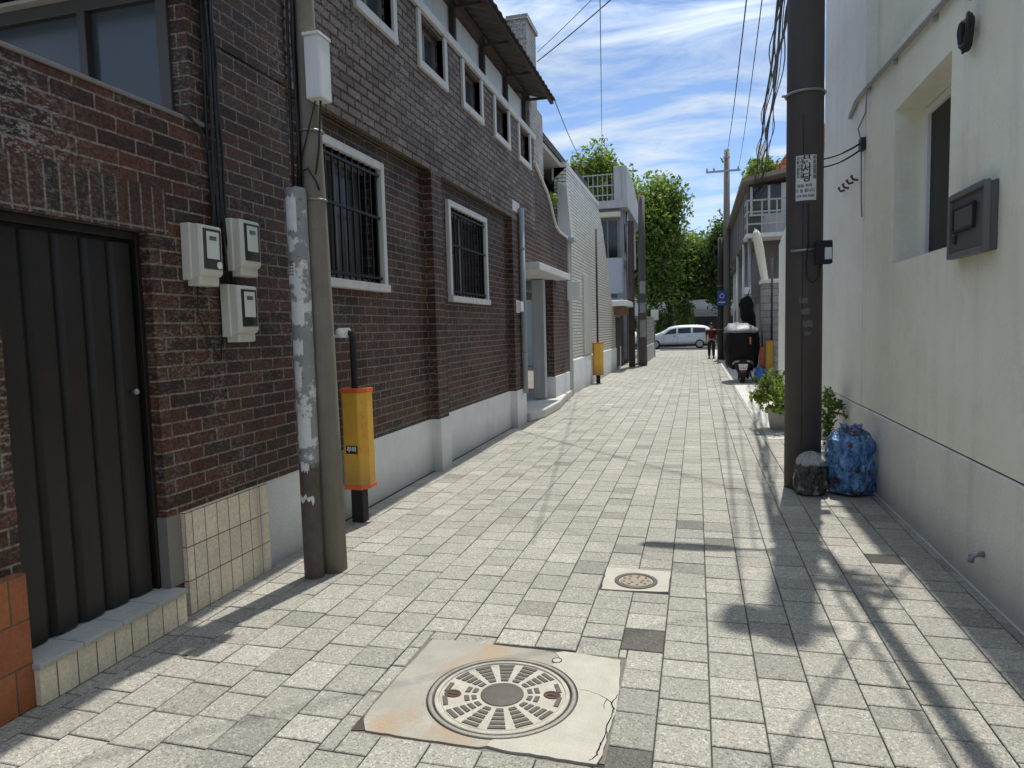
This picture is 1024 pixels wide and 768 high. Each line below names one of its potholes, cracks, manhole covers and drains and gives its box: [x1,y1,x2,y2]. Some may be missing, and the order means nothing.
manhole cover [428,657,577,740]
crack [586,690,617,761]
manhole cover [614,573,658,589]
